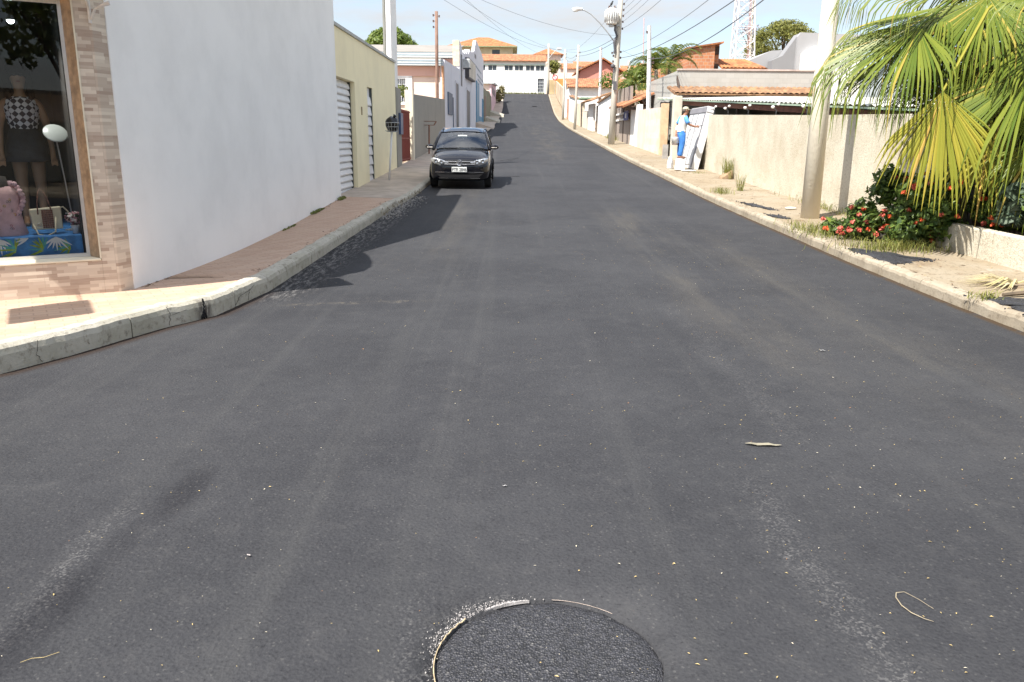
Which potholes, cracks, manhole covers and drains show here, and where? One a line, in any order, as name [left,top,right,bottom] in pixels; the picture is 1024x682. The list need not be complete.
manhole cover [422,596,664,682]
